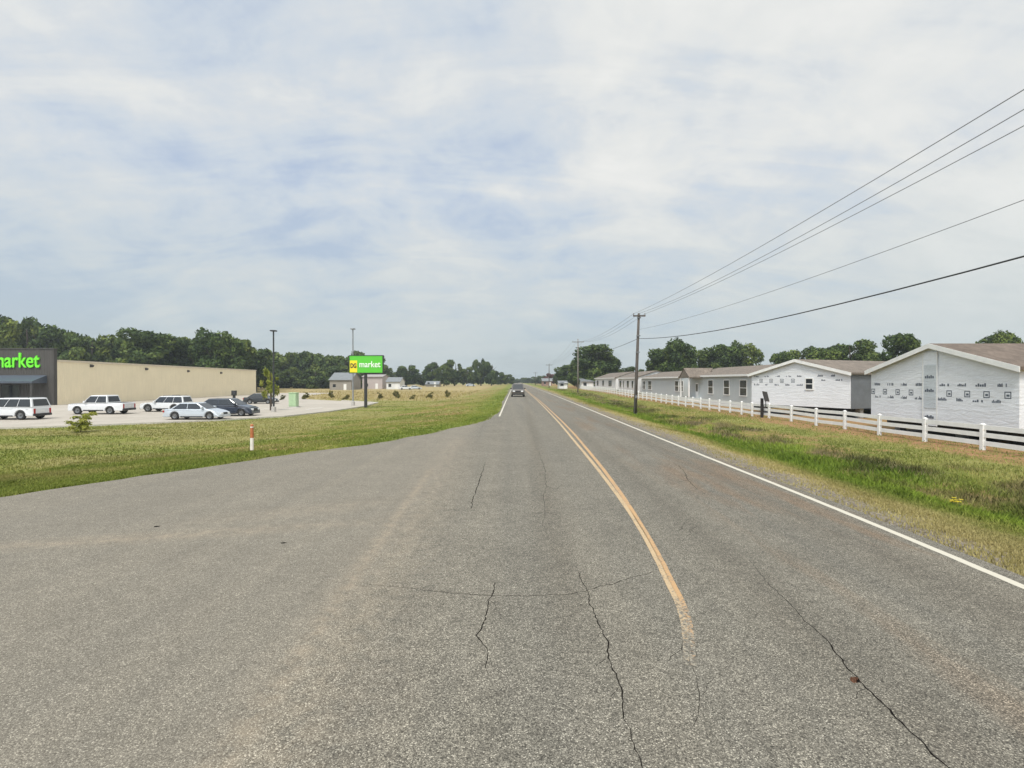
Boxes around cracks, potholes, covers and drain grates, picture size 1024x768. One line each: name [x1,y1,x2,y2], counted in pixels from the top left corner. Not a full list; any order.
crack [670,646,711,728]
crack [369,571,655,768]
crack [749,560,949,768]
